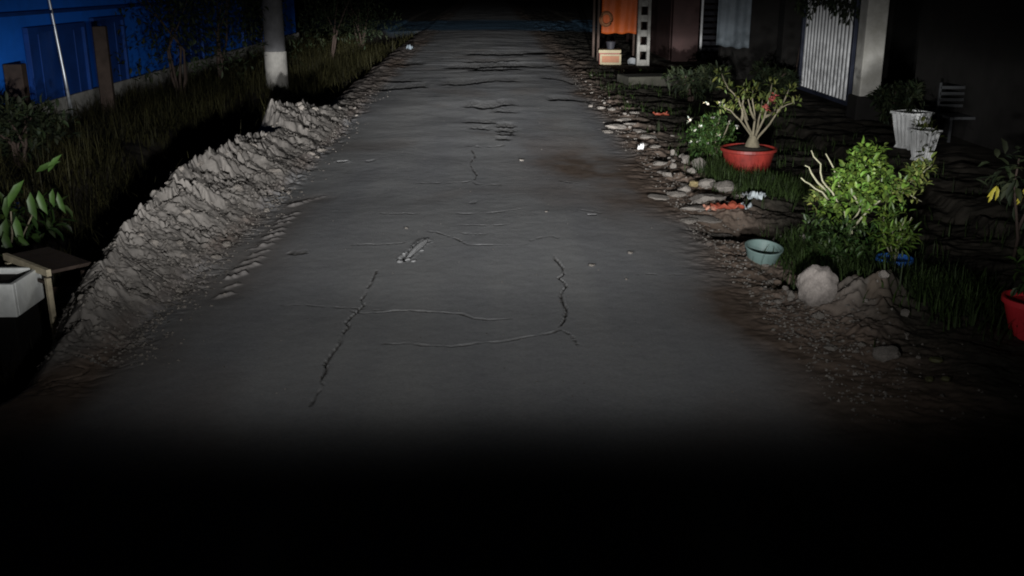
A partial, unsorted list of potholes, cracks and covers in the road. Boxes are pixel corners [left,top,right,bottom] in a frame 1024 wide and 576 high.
crack [276,208,584,408]
pothole [396,238,435,262]
crack [413,144,511,186]
